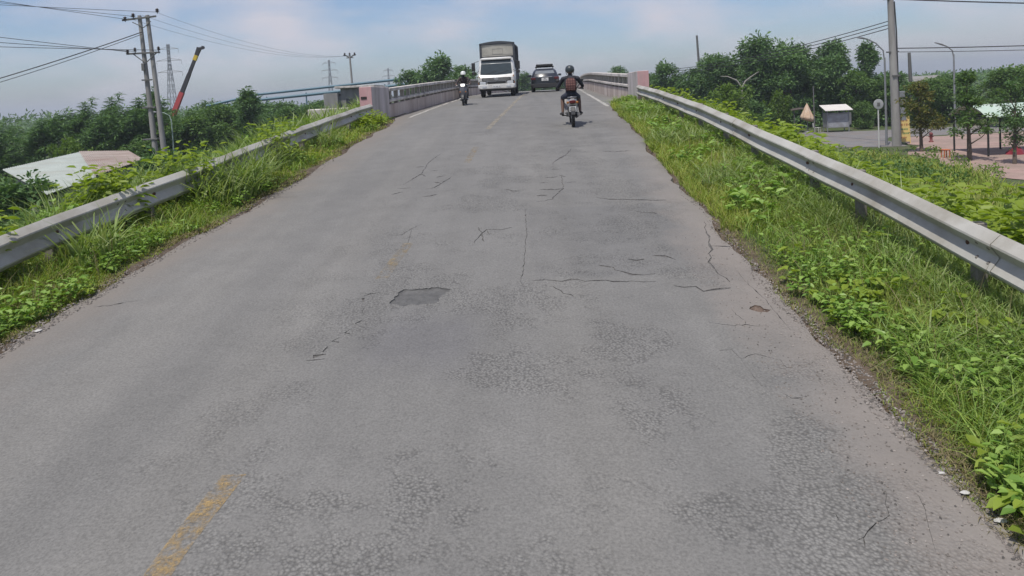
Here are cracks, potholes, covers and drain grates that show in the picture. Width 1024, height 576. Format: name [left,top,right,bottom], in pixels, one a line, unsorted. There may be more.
pothole [390,287,450,306]
crack [674,222,789,328]
crack [474,227,511,242]
crack [306,293,374,361]
crack [391,154,450,197]
crack [828,478,937,554]
crack [600,255,676,275]
